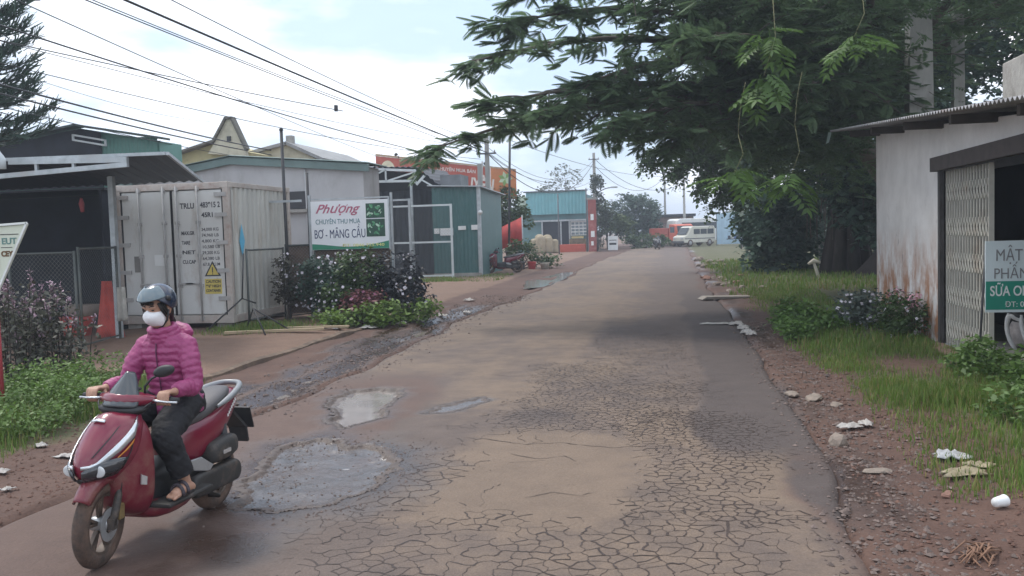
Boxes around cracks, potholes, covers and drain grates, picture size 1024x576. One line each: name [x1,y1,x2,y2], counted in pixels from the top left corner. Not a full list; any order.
pothole [225,437,405,514]
crack [332,315,732,518]
pothole [322,387,408,429]
crack [276,408,845,576]
pothole [417,396,492,414]
